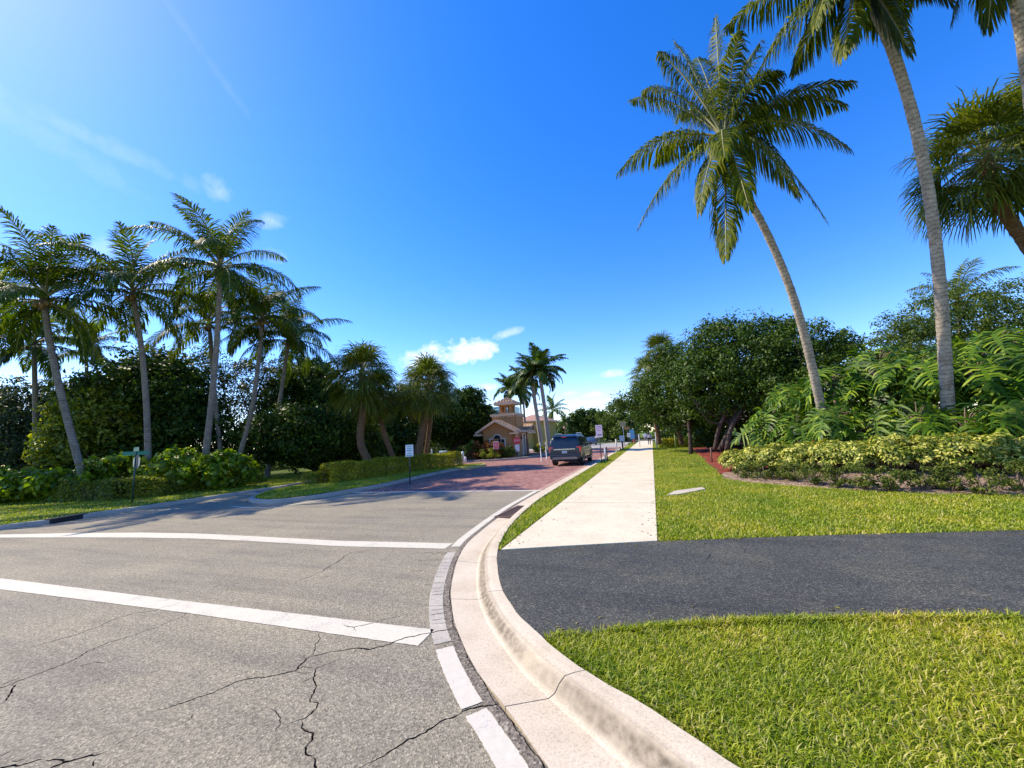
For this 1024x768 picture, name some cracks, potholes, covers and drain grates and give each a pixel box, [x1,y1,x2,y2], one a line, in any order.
crack [1,611,182,701]
crack [1,735,138,768]
drain grate [44,513,88,524]
crack [359,704,498,768]
drain grate [494,505,524,518]
crack [162,628,455,768]
